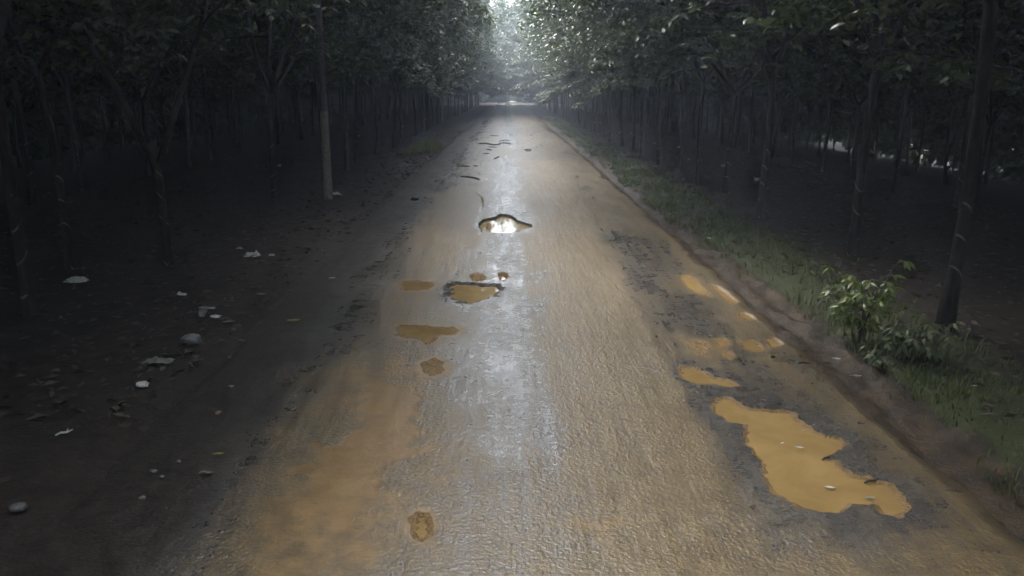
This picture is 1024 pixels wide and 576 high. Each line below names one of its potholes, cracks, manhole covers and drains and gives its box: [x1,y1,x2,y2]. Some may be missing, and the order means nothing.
pothole [407,511,434,543]
pothole [673,365,741,388]
pothole [442,281,506,304]
pothole [470,272,487,282]
pothole [709,396,913,519]
pothole [478,214,533,233]
